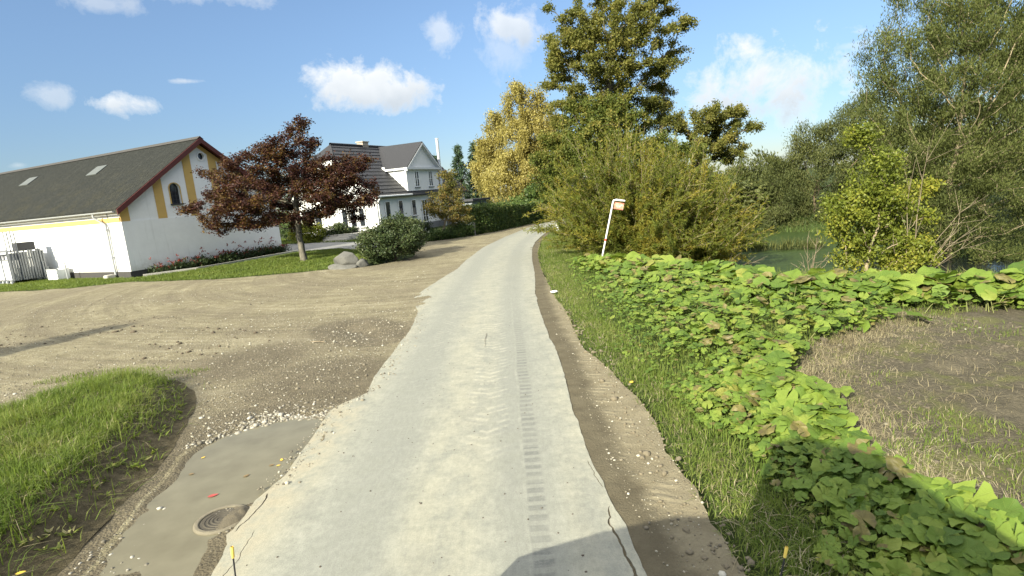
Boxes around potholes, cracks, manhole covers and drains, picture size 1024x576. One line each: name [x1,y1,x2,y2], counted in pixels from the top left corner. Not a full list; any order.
crack [223,493,268,576]
manhole cover [193,504,249,536]
crack [608,507,638,576]
